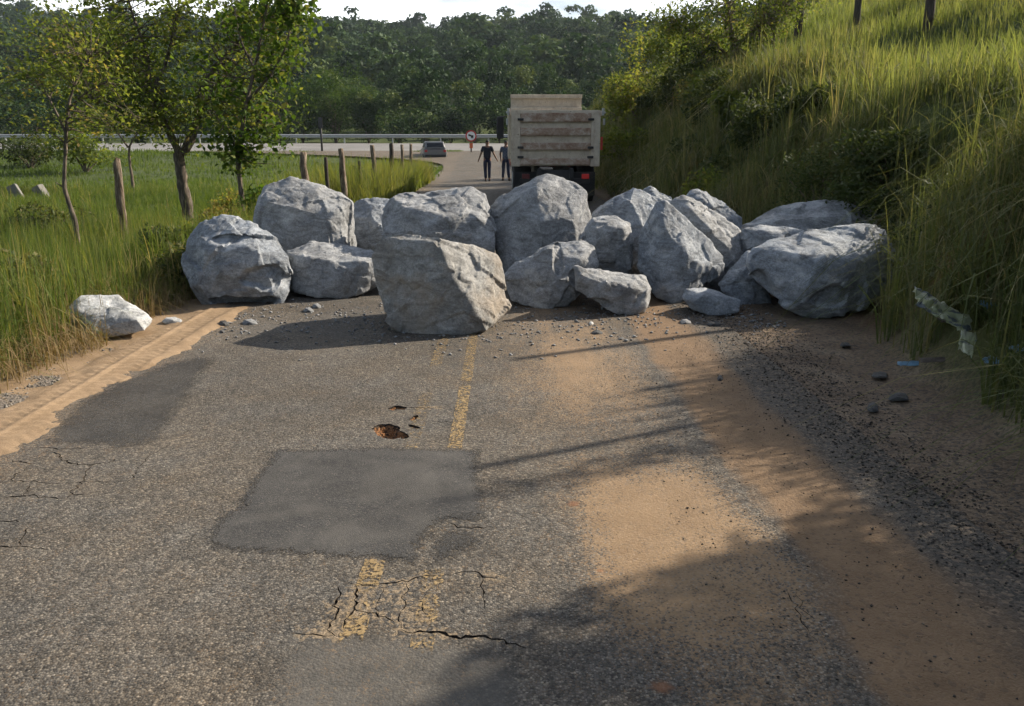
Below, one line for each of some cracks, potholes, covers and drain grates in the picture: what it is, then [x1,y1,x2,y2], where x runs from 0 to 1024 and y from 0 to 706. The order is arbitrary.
pothole [371,424,409,439]
crack [296,571,526,648]
crack [0,447,165,550]
